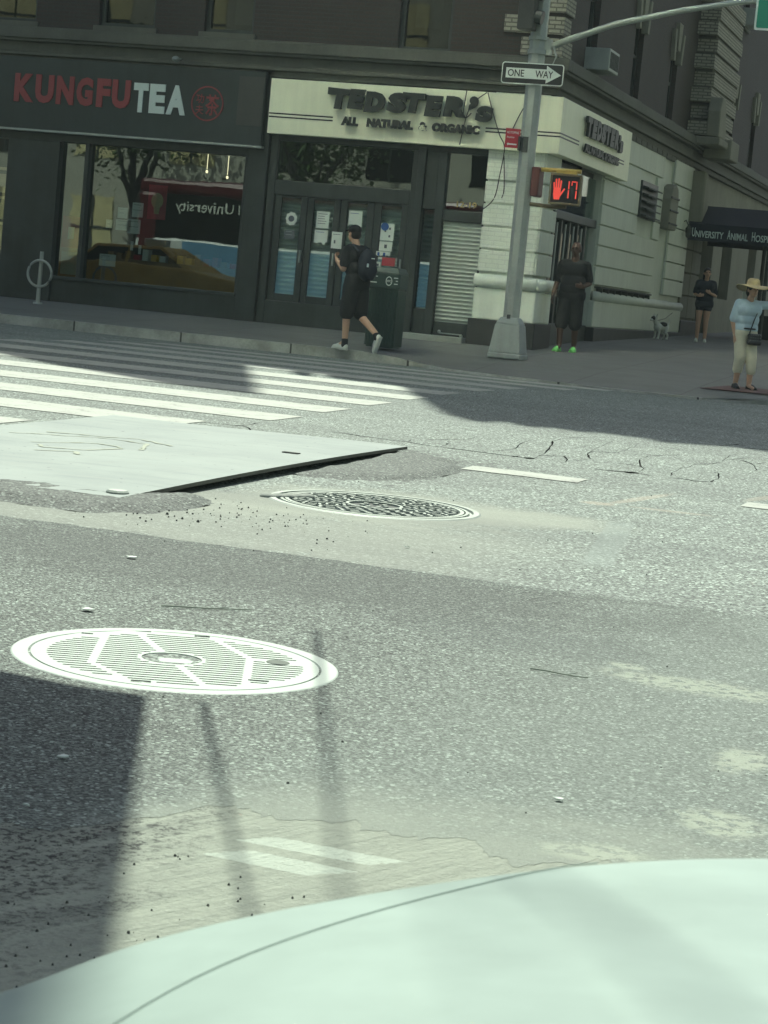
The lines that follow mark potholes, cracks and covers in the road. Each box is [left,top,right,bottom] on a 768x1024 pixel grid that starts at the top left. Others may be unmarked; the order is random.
crack [336,432,766,482]
manhole cover [10,628,338,695]
manhole cover [260,490,481,521]
